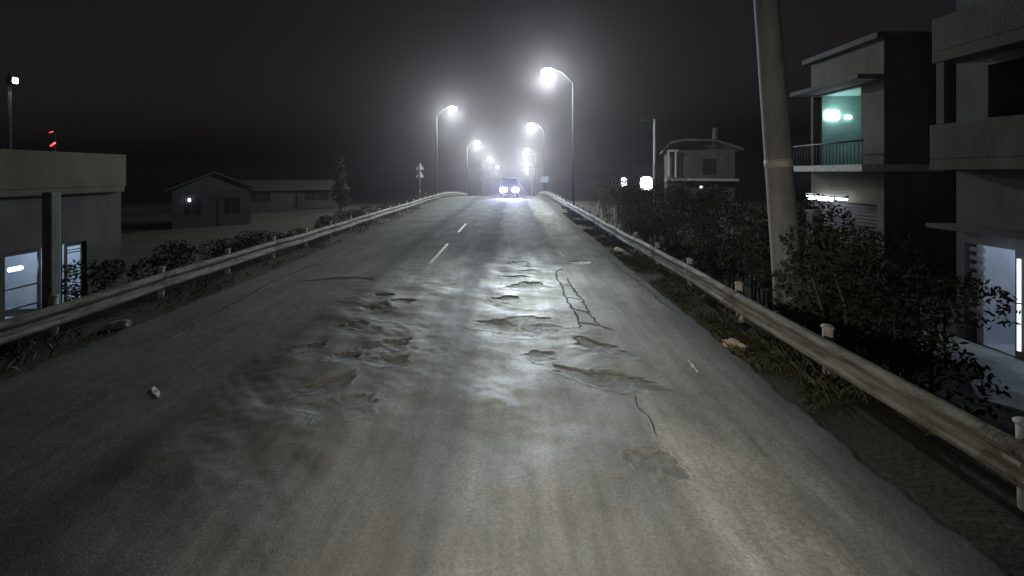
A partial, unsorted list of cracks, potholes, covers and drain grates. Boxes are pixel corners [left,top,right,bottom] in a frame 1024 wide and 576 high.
pothole [566,333,645,362]
pothole [498,280,550,292]
pothole [618,444,698,485]
crack [555,258,679,331]
pothole [520,348,561,365]
pothole [287,391,387,427]
pothole [356,302,392,310]
crack [635,395,657,438]
pothole [354,336,418,360]
pothole [325,319,372,332]
pothole [359,353,414,368]
pothole [538,361,696,396]
